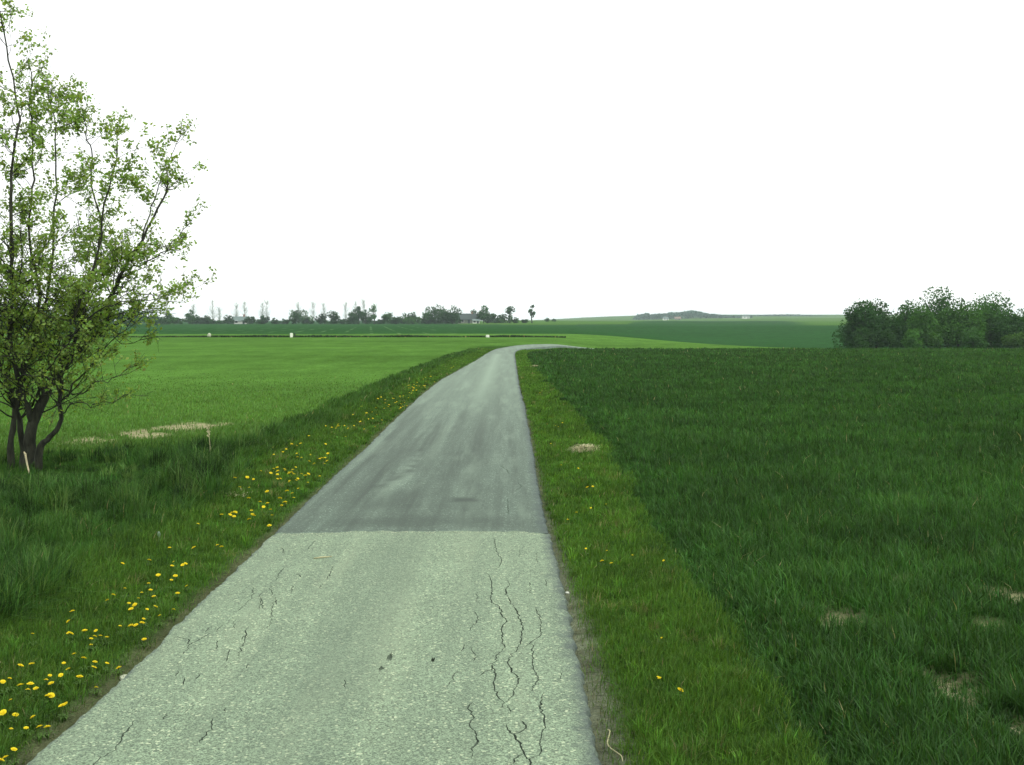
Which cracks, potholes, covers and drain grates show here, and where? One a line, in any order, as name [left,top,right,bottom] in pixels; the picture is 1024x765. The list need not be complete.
crack [179,548,301,669]
crack [93,722,133,765]
crack [446,539,562,765]
